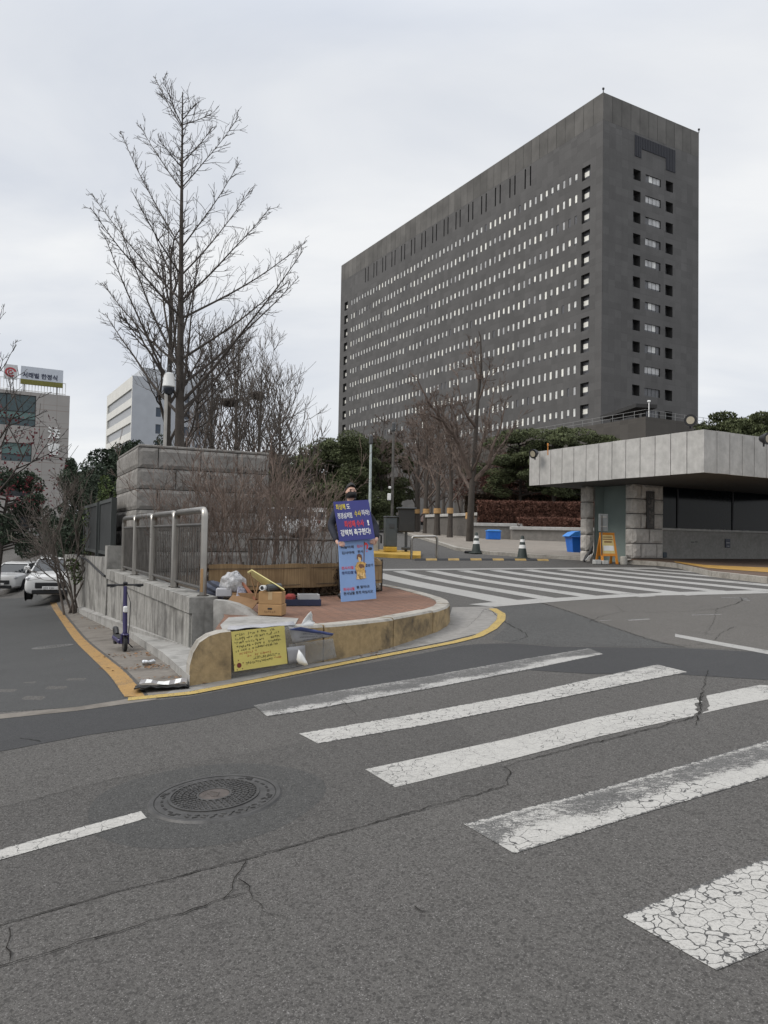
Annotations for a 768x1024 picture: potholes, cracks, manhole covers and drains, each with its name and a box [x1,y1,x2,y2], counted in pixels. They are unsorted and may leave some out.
manhole cover [147,774,282,824]
crack [0,859,285,966]
crack [696,671,708,725]
